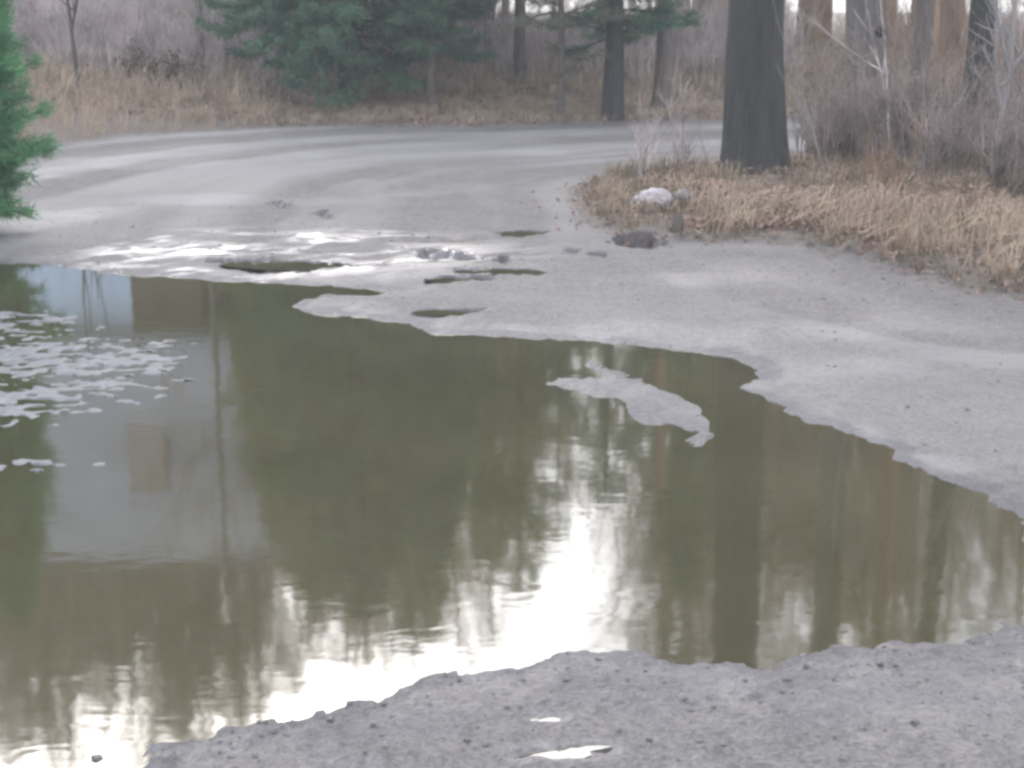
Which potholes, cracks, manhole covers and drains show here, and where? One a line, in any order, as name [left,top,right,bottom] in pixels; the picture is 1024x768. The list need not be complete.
pothole [0,258,1024,768]
pothole [494,229,552,238]
